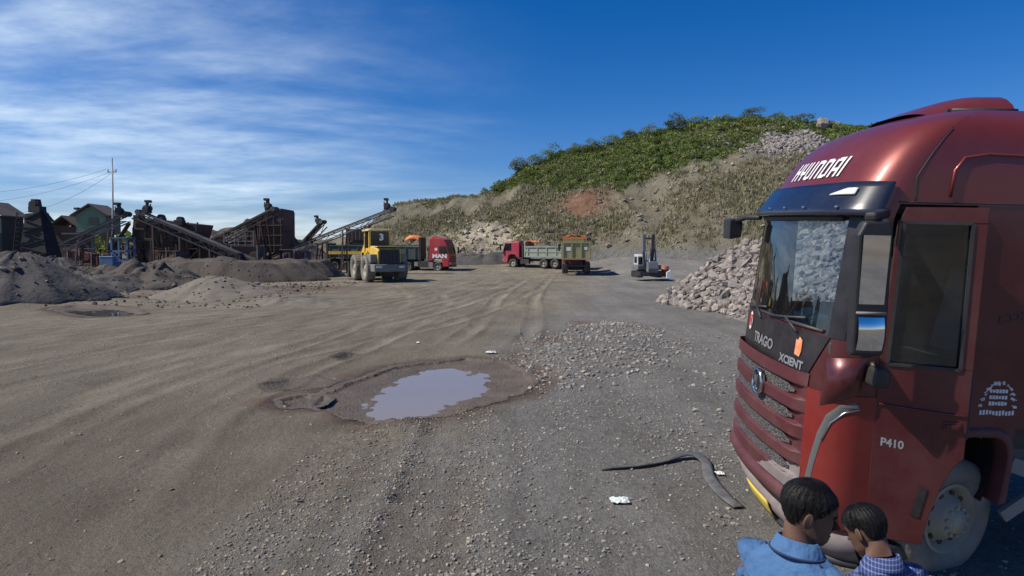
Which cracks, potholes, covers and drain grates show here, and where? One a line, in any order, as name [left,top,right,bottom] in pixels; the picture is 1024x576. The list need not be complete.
pothole [328,351,361,360]
pothole [307,357,540,425]
pothole [45,304,148,317]
pothole [257,374,337,392]
